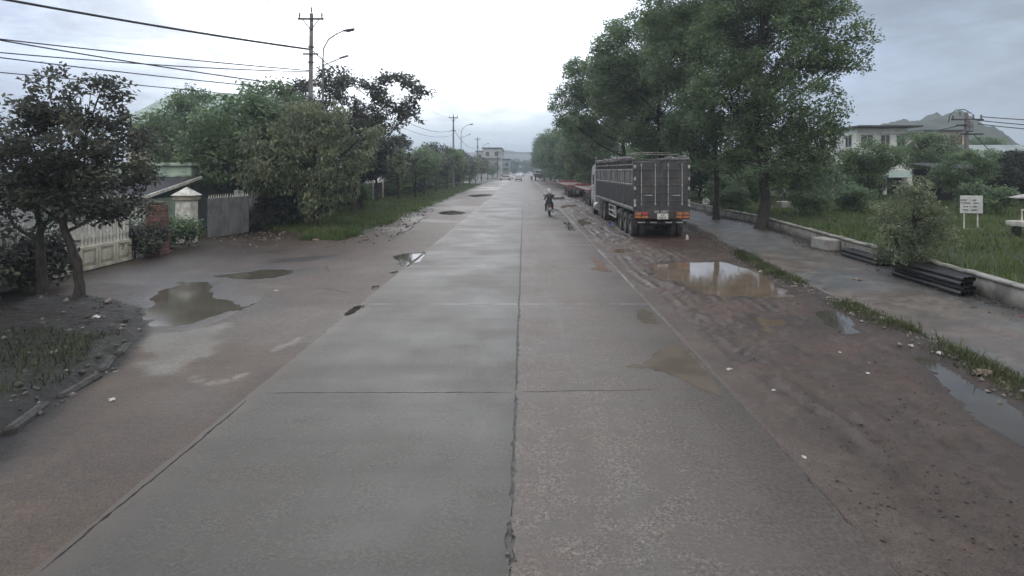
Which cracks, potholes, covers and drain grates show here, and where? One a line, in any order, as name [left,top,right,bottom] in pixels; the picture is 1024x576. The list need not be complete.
pothole [393,251,427,267]
